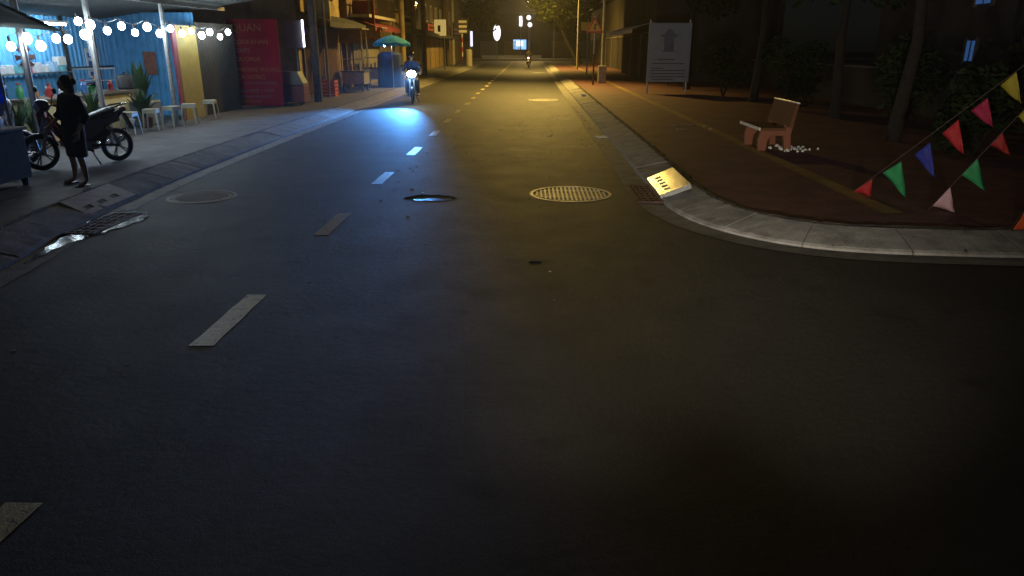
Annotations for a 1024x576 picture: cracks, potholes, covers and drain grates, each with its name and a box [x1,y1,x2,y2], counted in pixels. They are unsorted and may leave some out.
manhole cover [529,186,613,202]
manhole cover [165,190,238,204]
drain grate [627,184,663,204]
drain grate [62,213,142,234]
